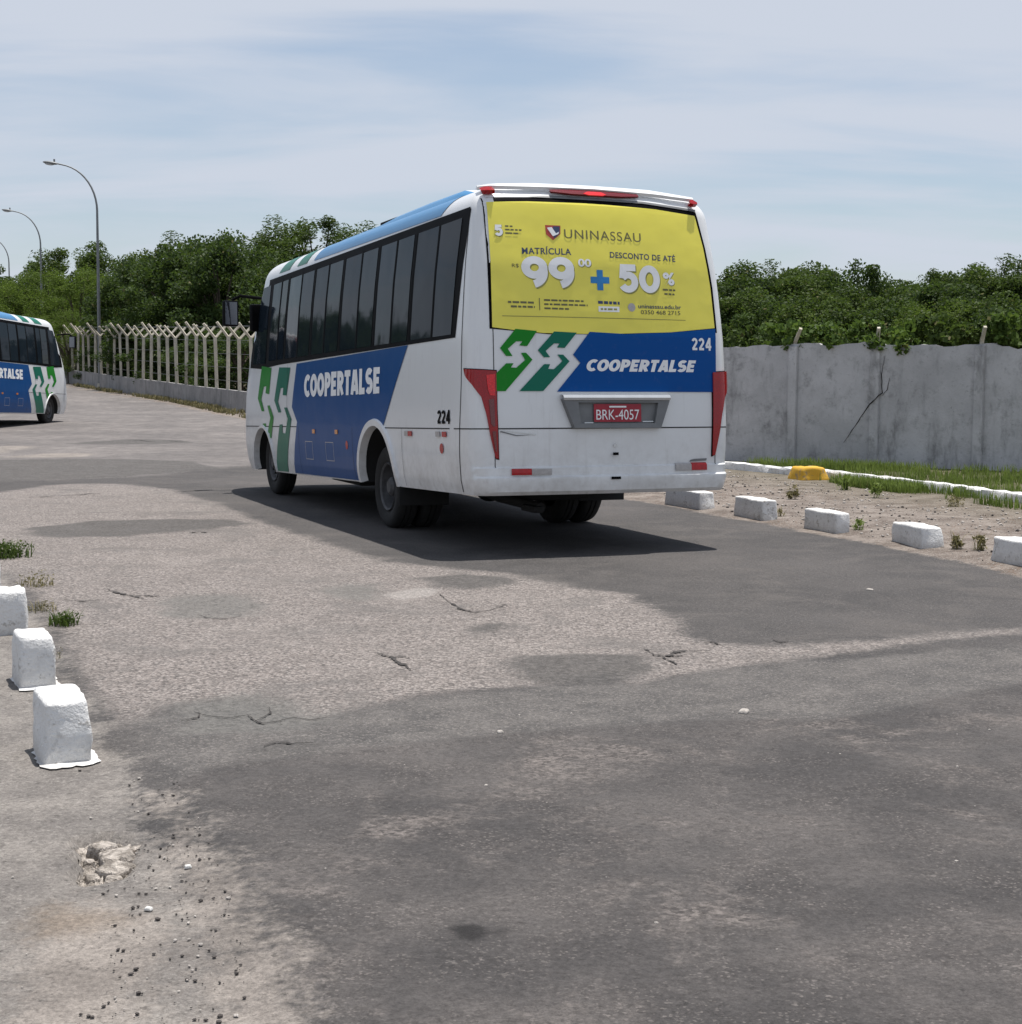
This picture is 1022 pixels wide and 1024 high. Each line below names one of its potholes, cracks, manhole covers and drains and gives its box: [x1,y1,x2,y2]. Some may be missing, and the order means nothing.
crack [377,652,411,670]
crack [181,707,326,723]
pothole [75,840,141,887]
crack [75,588,161,601]
crack [644,641,720,664]
